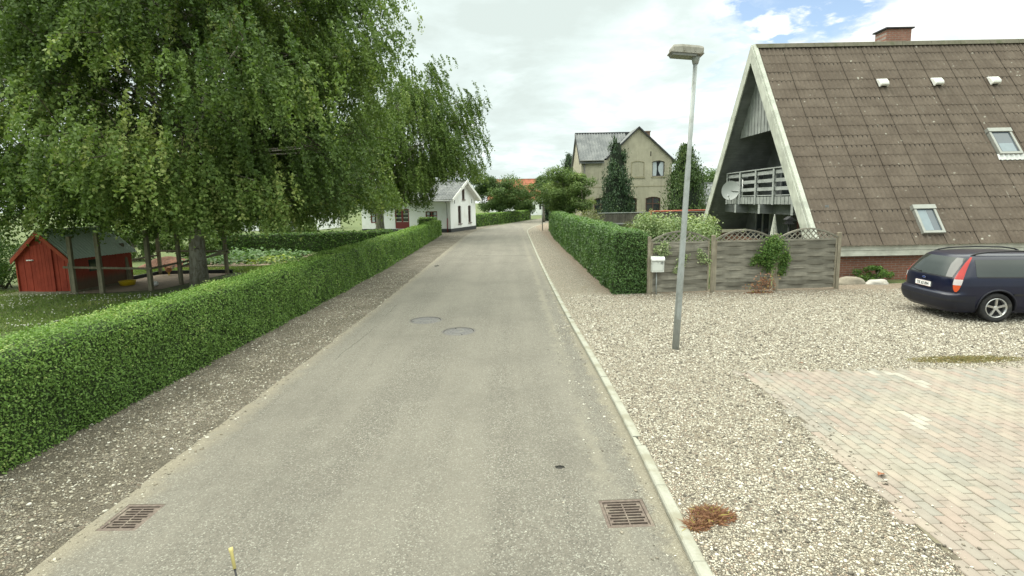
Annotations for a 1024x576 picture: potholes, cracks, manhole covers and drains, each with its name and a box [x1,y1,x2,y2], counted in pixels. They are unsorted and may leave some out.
drain grate [599,499,655,528]
manhole cover [409,316,443,324]
drain grate [96,504,166,531]
manhole cover [441,327,476,336]
